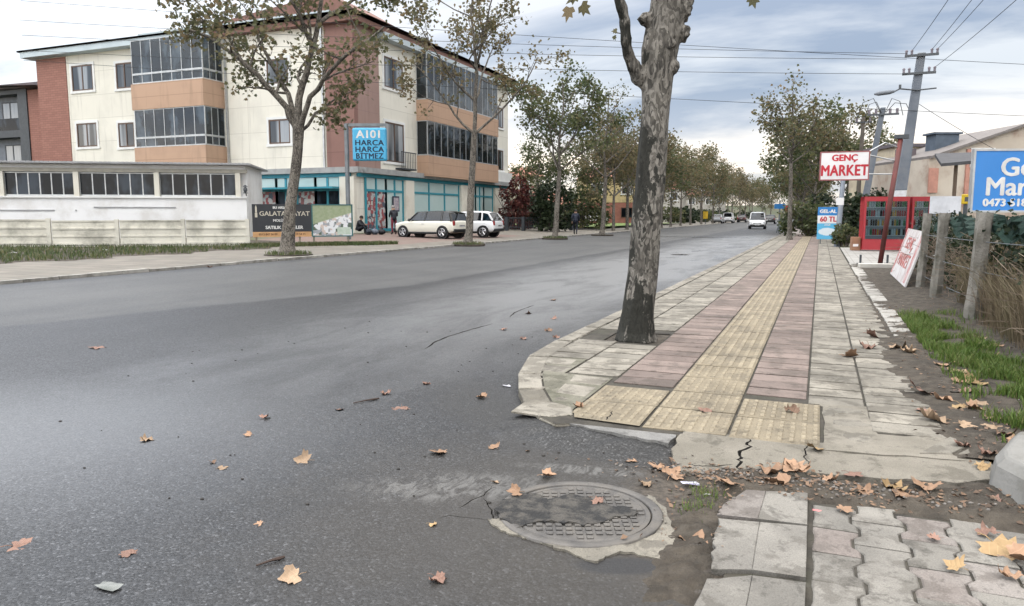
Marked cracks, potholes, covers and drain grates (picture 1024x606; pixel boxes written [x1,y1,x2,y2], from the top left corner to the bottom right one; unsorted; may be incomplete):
crack [440,487,494,520]
manhole cover [488,481,675,563]
crack [425,324,490,349]
crack [690,439,753,470]
